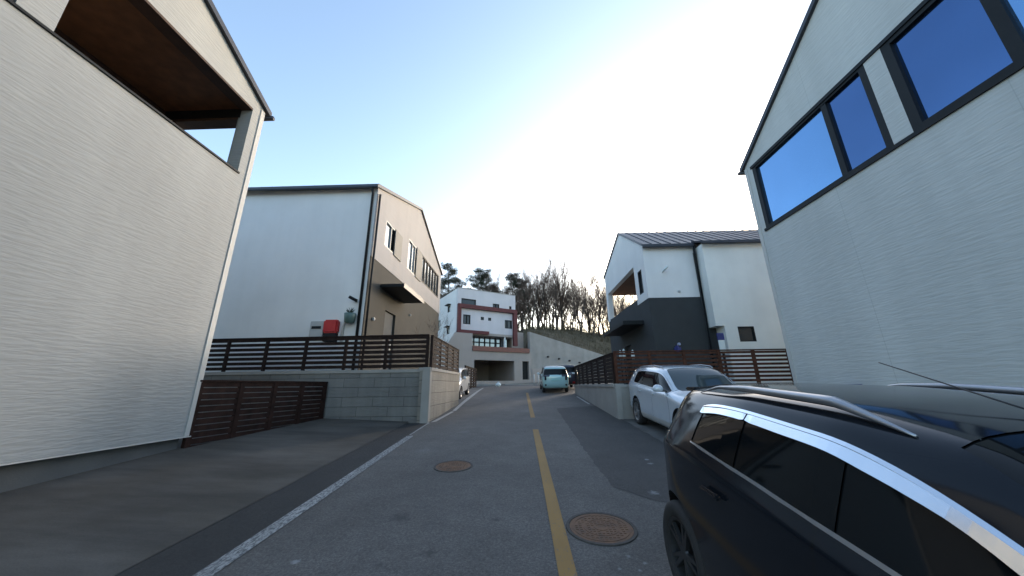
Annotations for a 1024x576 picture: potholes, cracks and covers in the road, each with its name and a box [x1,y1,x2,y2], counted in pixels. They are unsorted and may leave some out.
manhole cover [566,512,638,547]
manhole cover [434,460,473,473]
